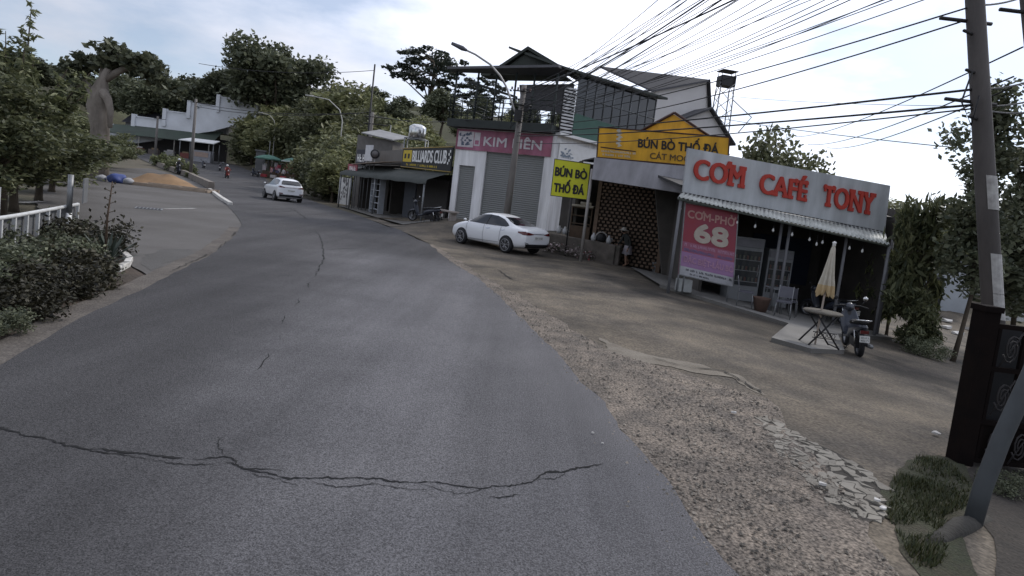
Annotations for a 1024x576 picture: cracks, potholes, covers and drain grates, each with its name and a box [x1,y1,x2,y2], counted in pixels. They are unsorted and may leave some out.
crack [0,427,600,498]
crack [257,208,348,370]
